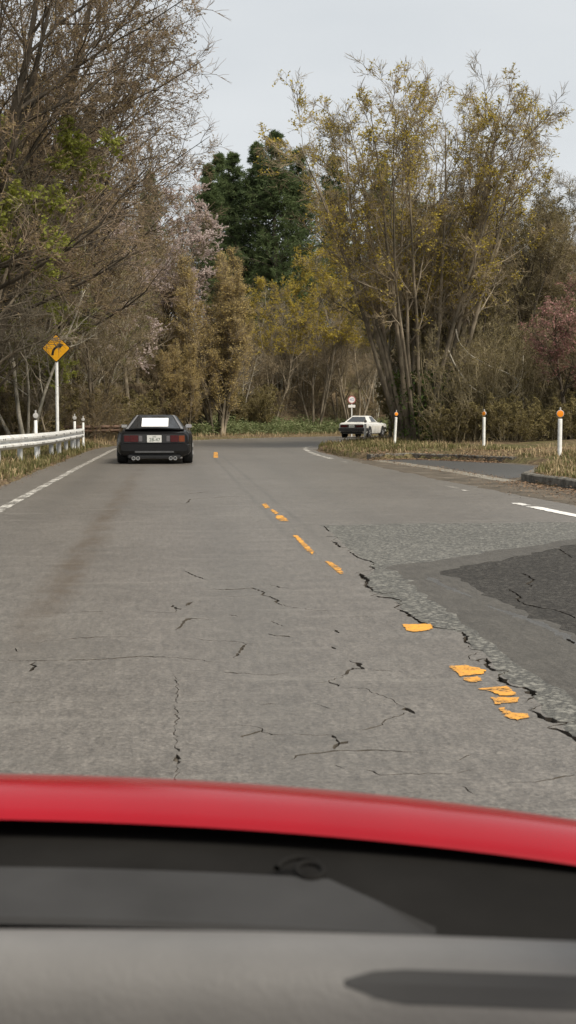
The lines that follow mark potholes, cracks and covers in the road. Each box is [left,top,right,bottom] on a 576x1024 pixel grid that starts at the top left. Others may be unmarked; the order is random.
crack [10,602,289,779]
crack [369,754,478,794]
crack [324,526,576,742]
crack [241,725,419,769]
crack [185,571,324,637]
